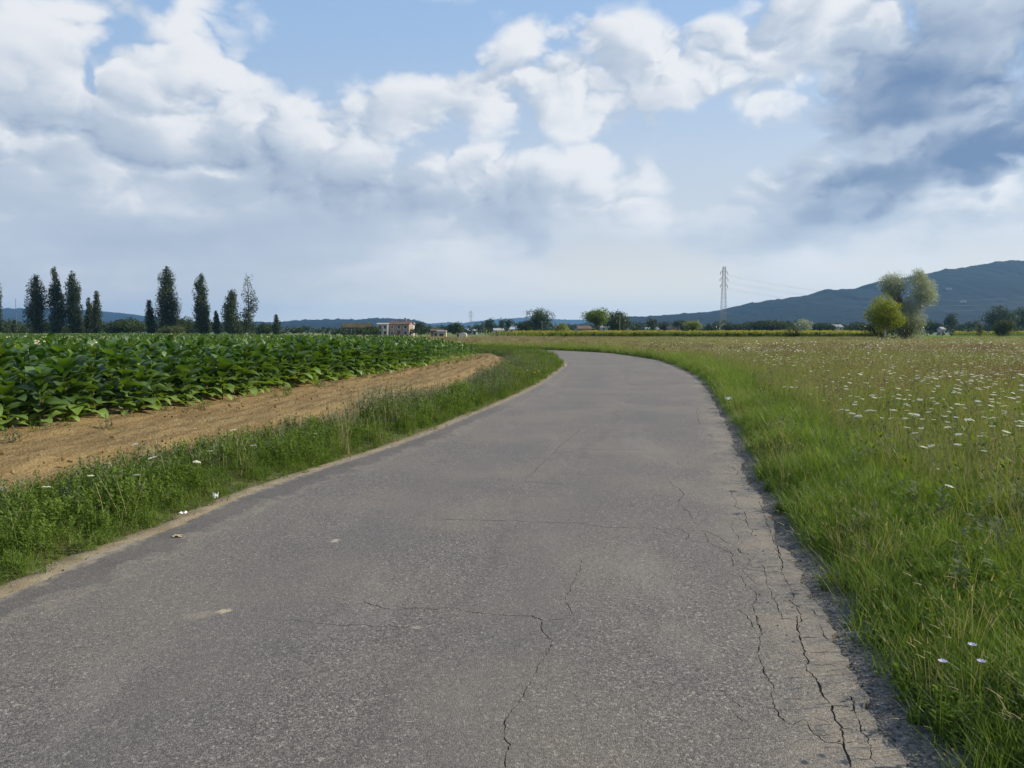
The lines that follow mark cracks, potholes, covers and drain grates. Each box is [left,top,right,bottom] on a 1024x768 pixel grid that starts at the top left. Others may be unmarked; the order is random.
crack [297,560,582,767]
crack [444,519,640,529]
crack [653,490,876,768]
